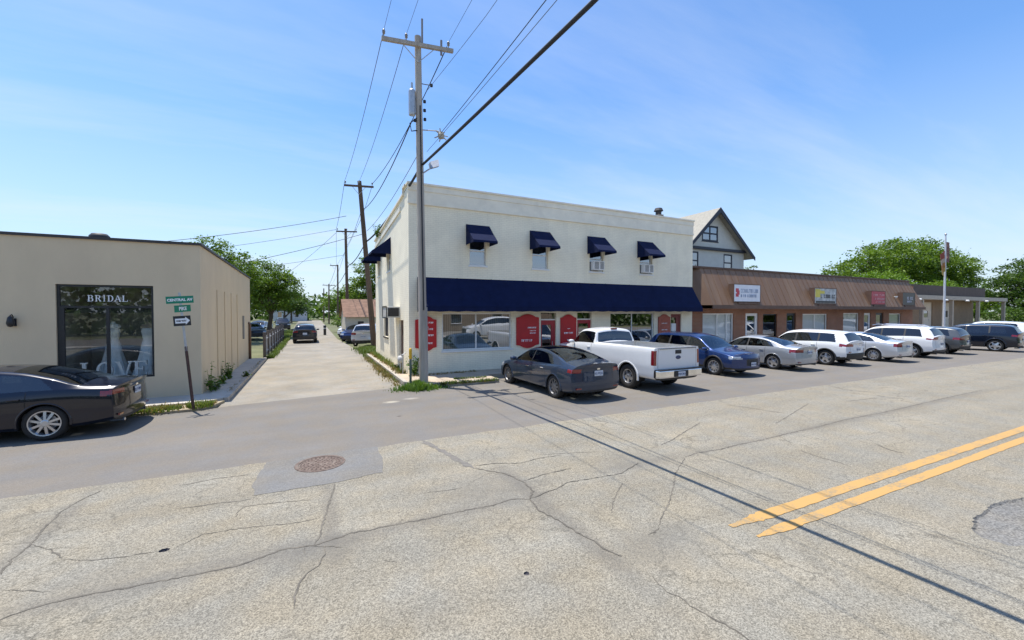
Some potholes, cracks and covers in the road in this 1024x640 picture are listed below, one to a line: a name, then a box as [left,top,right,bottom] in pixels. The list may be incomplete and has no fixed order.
manhole cover [294,455,345,473]
crack [0,490,316,592]
crack [648,423,700,535]
crack [653,577,749,640]
